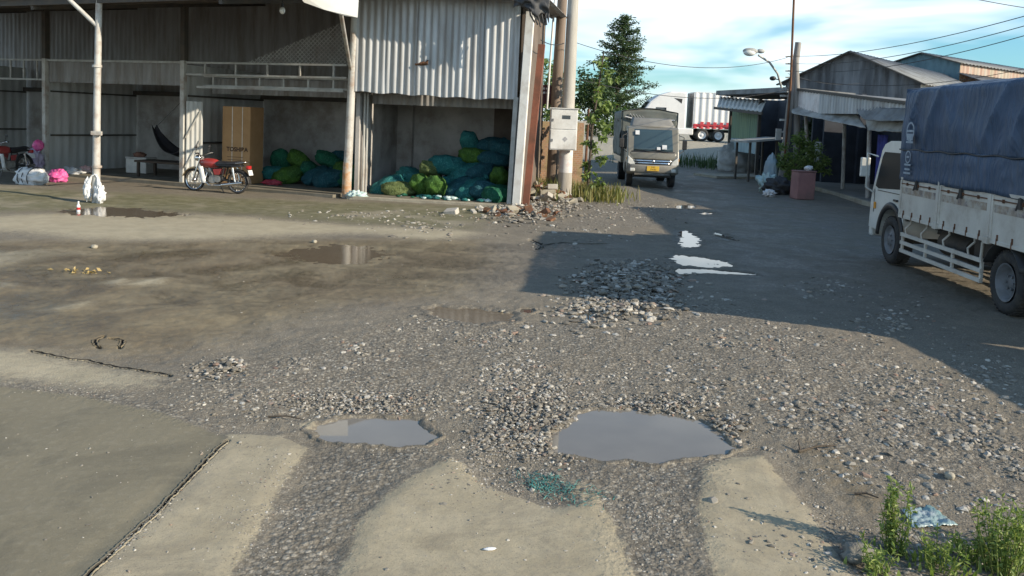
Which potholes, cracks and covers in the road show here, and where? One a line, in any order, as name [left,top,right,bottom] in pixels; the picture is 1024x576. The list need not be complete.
pothole [300,413,446,450]
pothole [408,301,528,328]
pothole [544,405,749,467]
